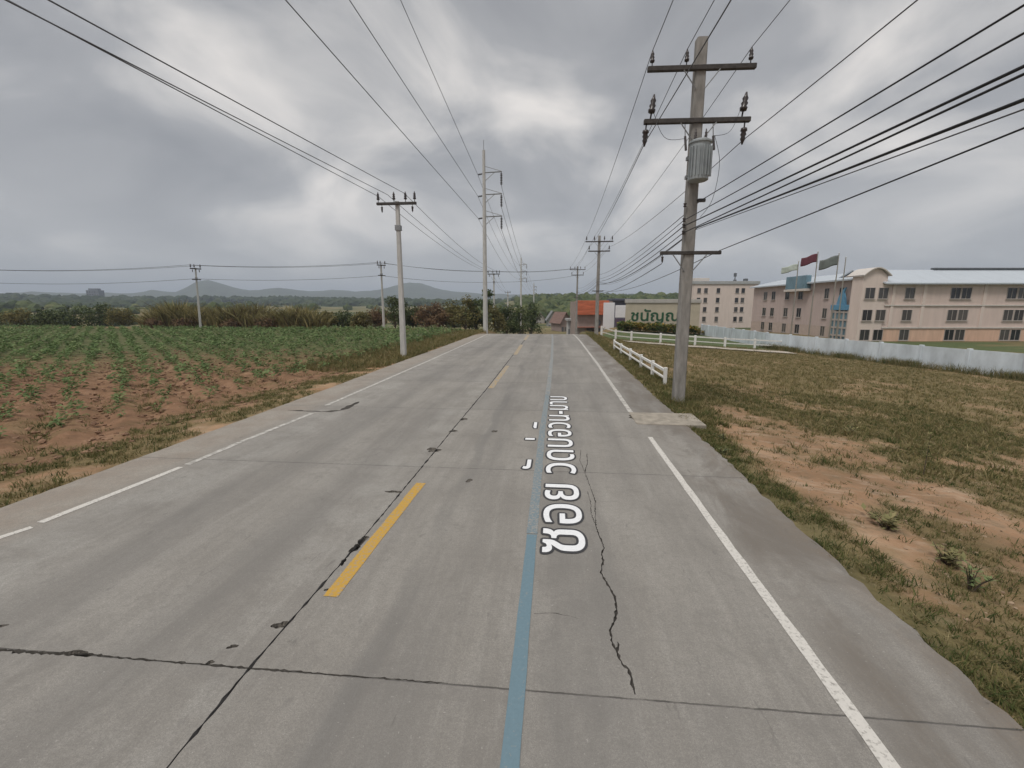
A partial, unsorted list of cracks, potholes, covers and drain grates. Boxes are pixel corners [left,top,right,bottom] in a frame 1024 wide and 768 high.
crack [291,402,359,412]
crack [580,450,636,694]
